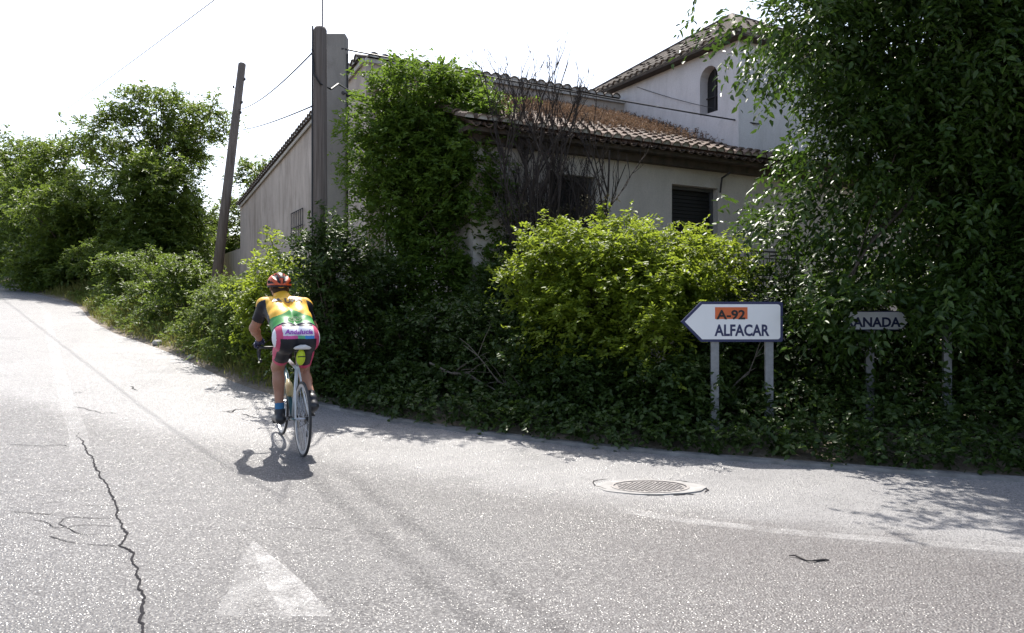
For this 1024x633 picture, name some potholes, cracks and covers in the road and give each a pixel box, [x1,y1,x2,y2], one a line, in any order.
manhole cover [596,479,707,495]
crack [12,433,146,633]
